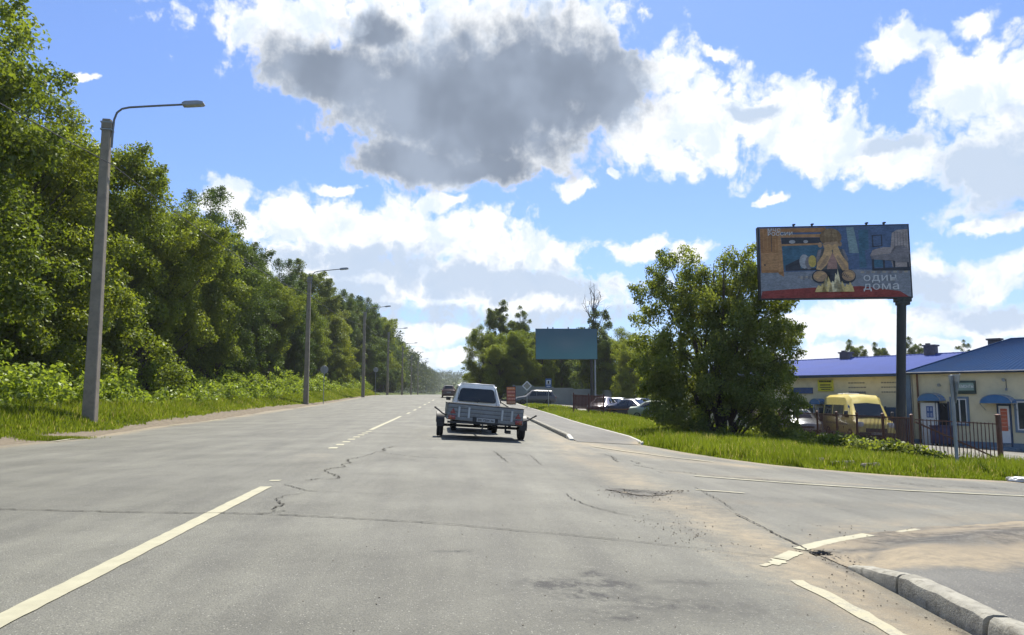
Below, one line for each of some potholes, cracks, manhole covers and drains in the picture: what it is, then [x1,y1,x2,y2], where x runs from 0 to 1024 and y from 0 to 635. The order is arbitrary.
crack [46,446,793,559]
pothole [606,488,672,496]
